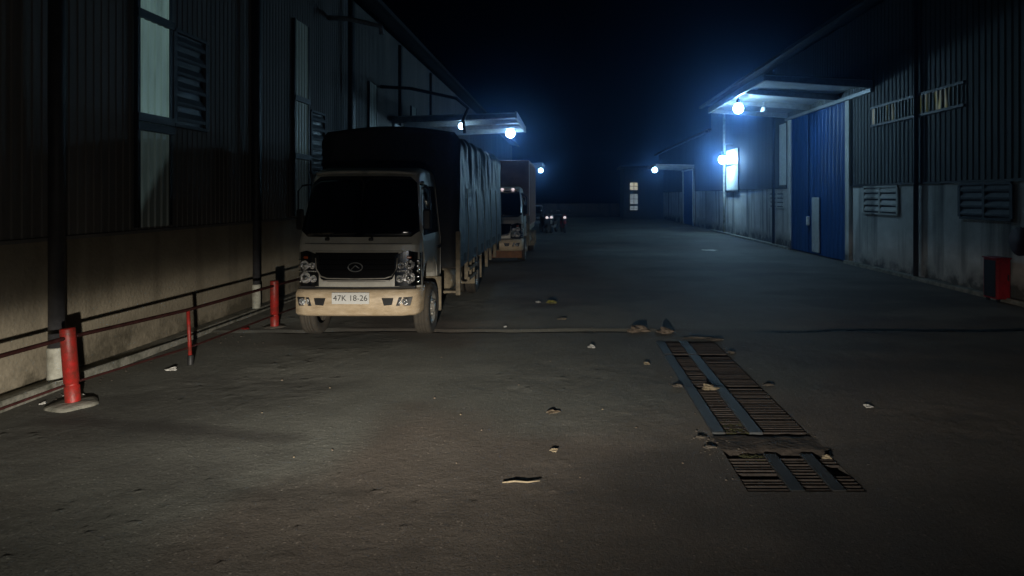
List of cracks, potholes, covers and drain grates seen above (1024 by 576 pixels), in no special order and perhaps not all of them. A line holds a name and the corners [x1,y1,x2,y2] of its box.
drain grate [664,355,759,389]
drain grate [728,454,864,492]
drain grate [656,341,727,357]
drain grate [684,386,806,436]
